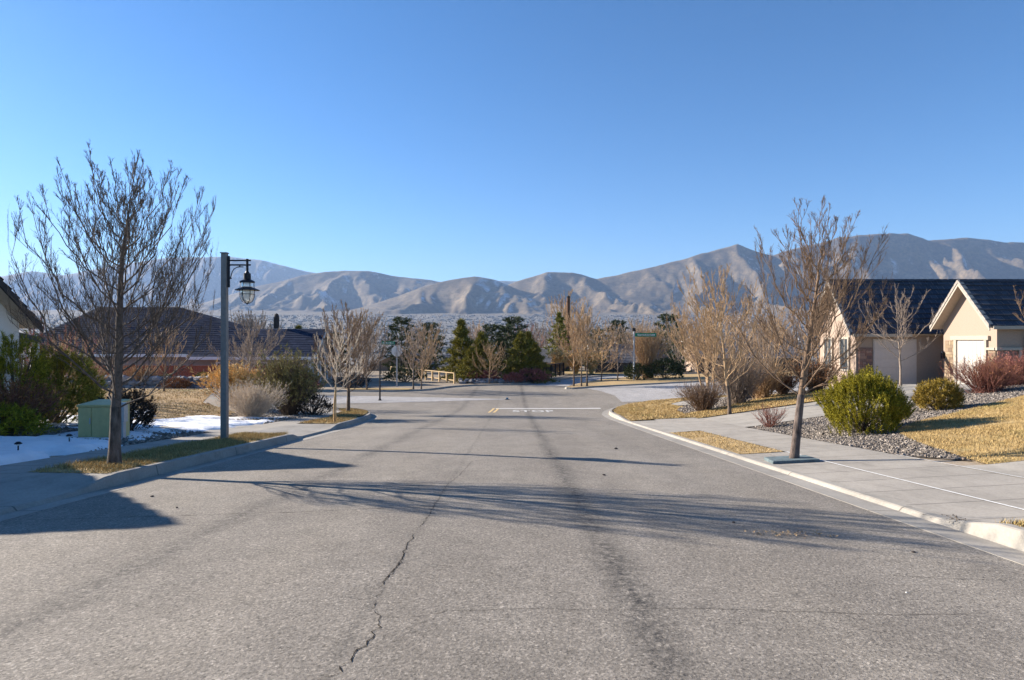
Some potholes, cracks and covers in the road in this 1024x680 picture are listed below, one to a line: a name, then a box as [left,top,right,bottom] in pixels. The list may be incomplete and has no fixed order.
crack [43,463,470,677]
